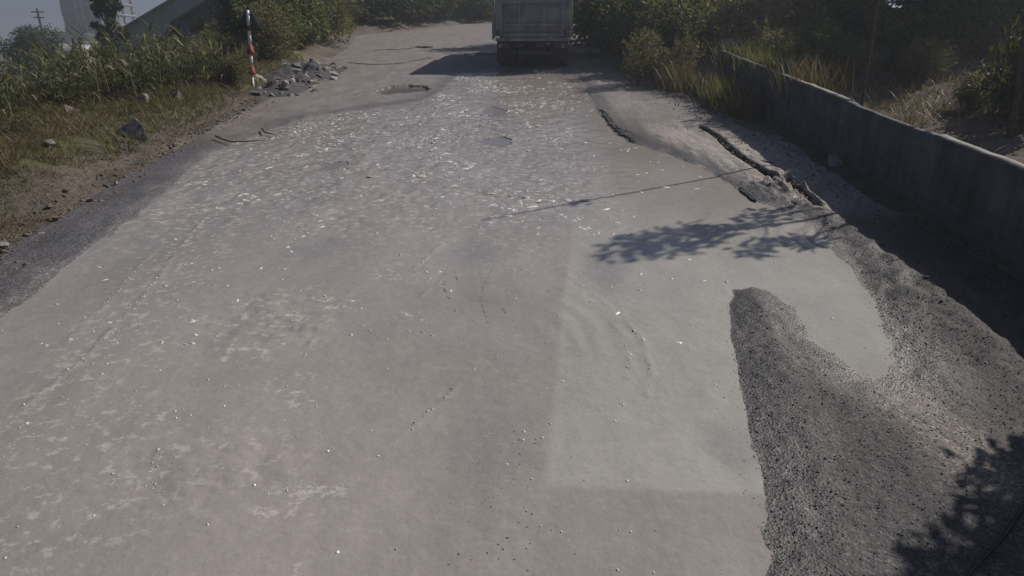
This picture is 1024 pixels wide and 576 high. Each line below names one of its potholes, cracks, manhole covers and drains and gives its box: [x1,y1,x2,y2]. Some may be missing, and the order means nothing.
pothole [479,137,514,147]
crack [700,126,818,206]
pothole [374,84,434,95]
crack [599,109,647,143]
pothole [481,106,509,118]
